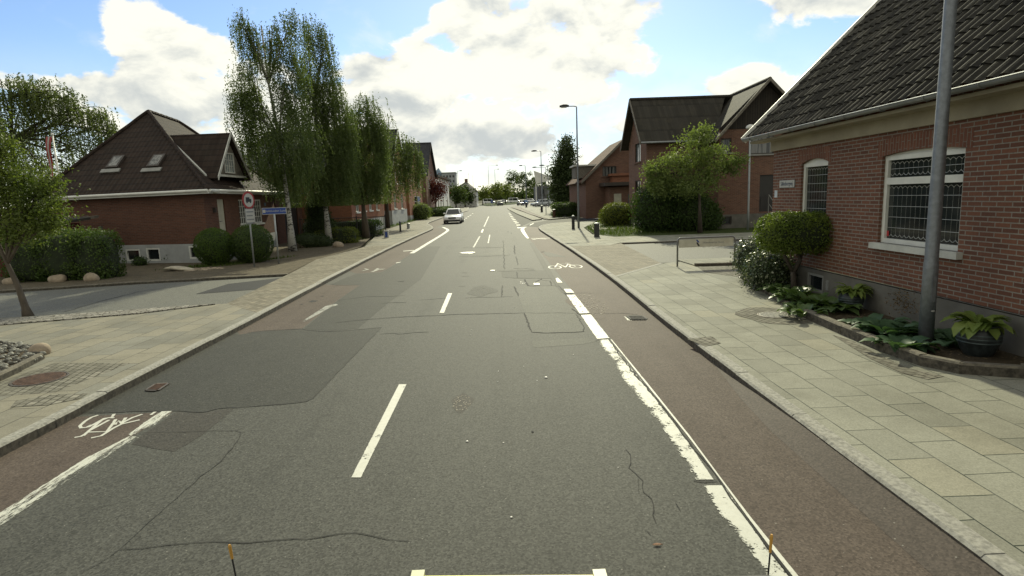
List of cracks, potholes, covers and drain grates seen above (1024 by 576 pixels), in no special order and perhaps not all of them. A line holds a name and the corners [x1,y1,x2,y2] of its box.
drain grate [145,383,170,391]
crack [84,430,406,571]
manhole cover [9,371,70,387]
